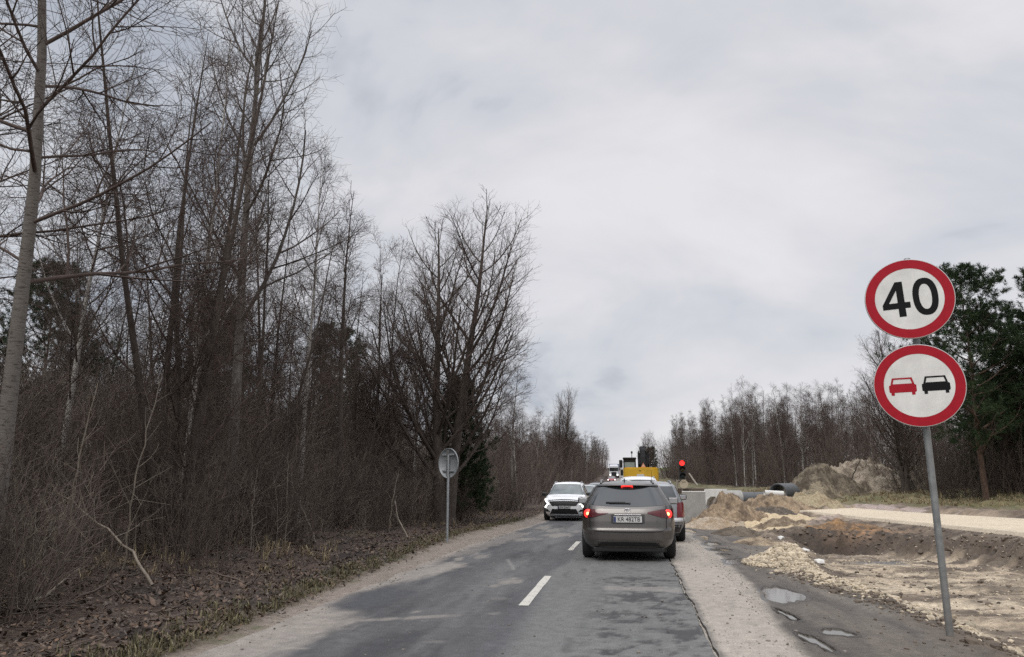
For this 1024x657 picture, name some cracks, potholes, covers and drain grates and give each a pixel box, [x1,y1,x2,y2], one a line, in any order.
pothole [817,627,862,638]
pothole [771,606,805,622]
pothole [792,629,841,655]
pothole [757,583,813,606]
